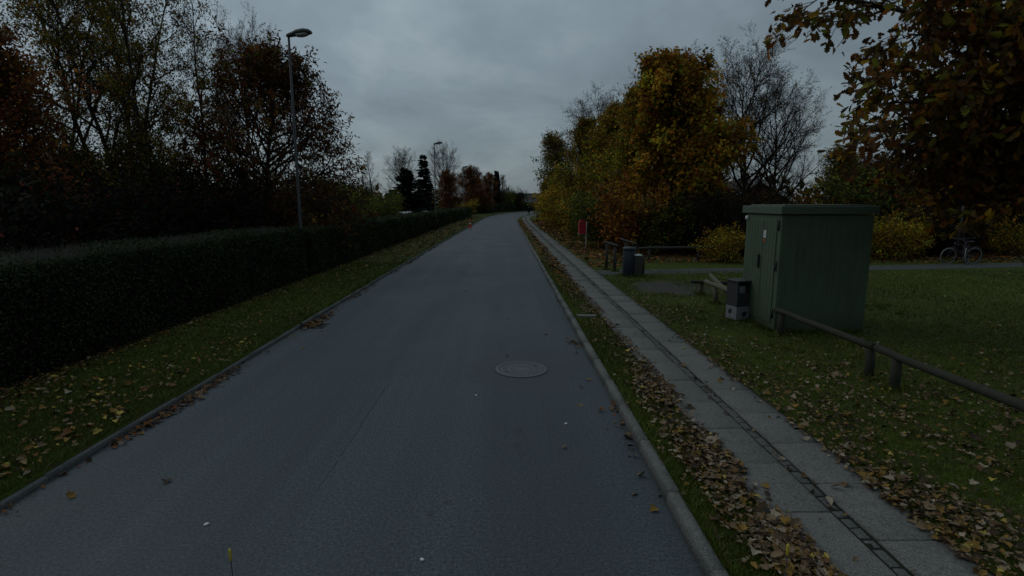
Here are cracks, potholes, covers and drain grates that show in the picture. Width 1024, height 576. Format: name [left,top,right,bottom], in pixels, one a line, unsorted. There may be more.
manhole cover [495,361,547,378]
